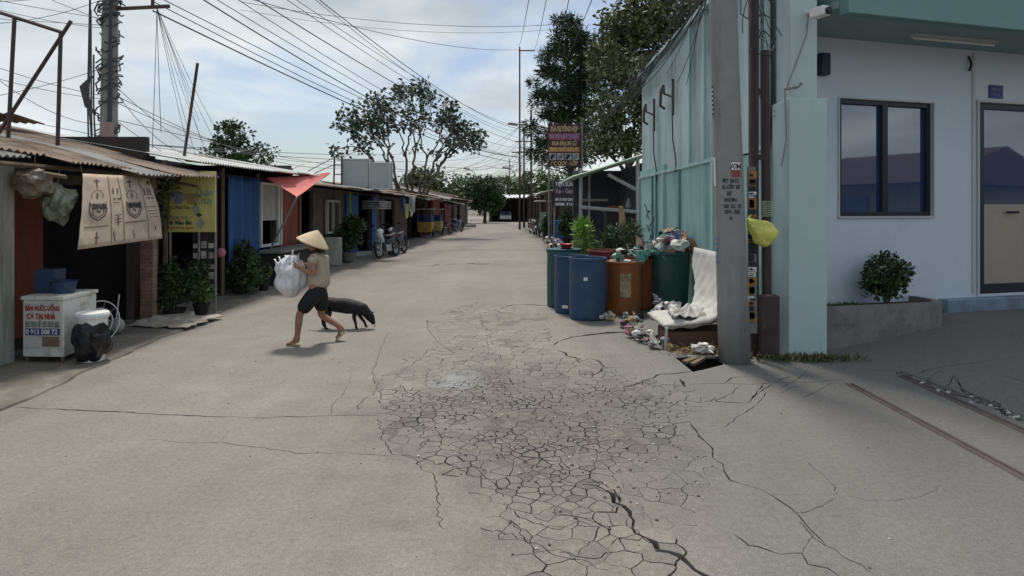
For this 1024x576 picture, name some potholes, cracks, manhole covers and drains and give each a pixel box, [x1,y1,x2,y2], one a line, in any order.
crack [154,431,388,456]
crack [553,332,1024,576]
